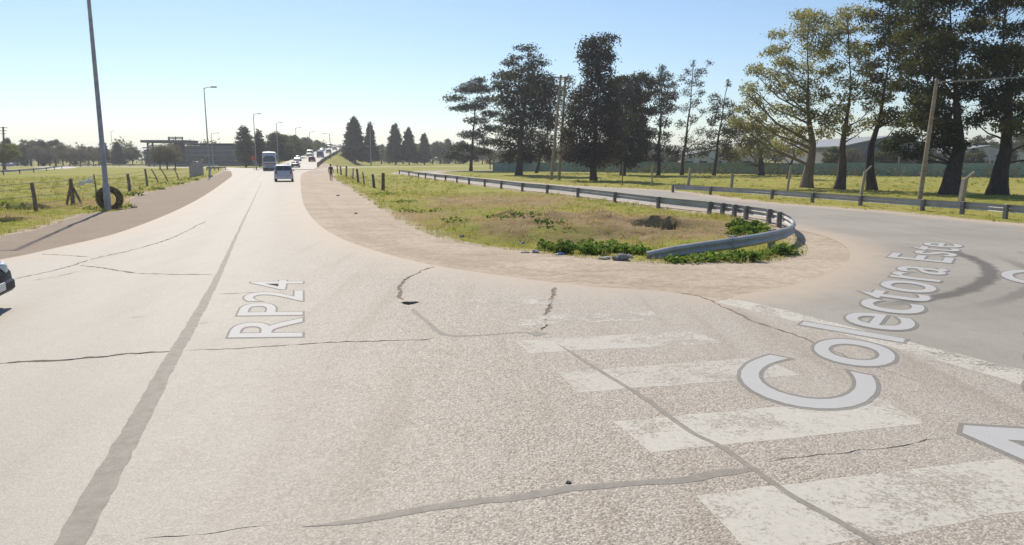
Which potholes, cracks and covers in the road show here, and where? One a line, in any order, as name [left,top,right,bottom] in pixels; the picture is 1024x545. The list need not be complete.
crack [201,337,434,350]
crack [16,221,211,281]
crack [396,267,432,300]
crack [541,287,557,330]
crack [772,437,950,462]
crack [676,292,911,379]
crack [0,351,169,364]
